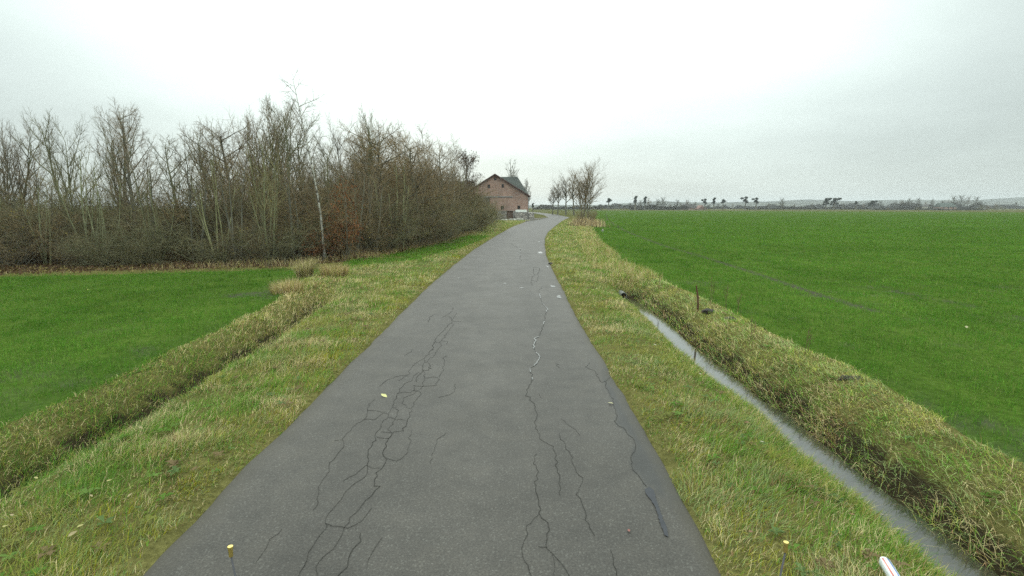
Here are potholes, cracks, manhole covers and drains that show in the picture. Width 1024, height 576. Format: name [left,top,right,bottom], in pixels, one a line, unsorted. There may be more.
crack [298,314,461,576]
crack [521,460,569,576]
crack [518,248,595,536]
